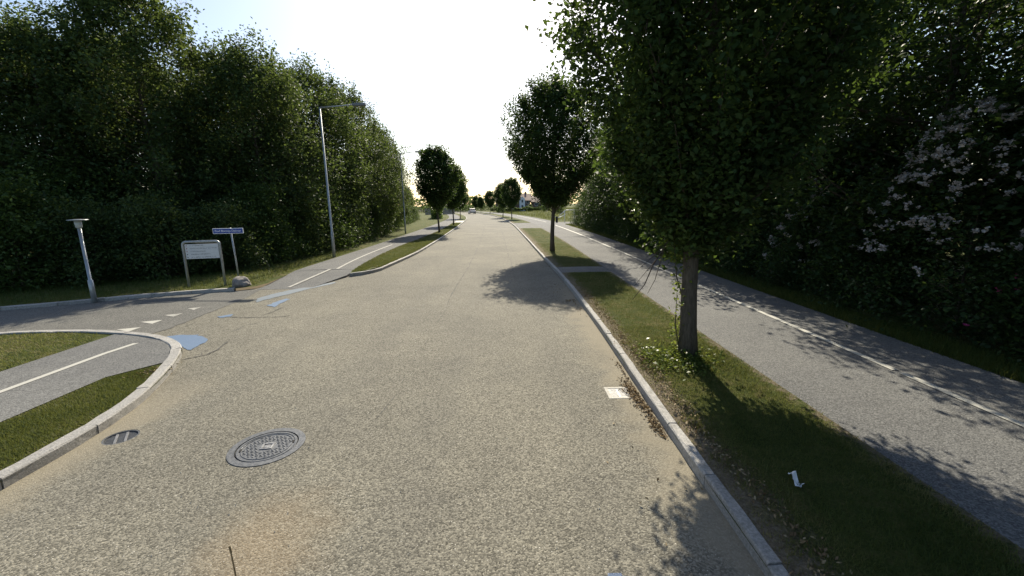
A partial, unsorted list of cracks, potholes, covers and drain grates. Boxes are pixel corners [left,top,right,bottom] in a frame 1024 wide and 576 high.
drain grate [101,430,140,445]
drain grate [604,387,631,399]
crack [185,308,289,359]
manhole cover [226,428,306,467]
